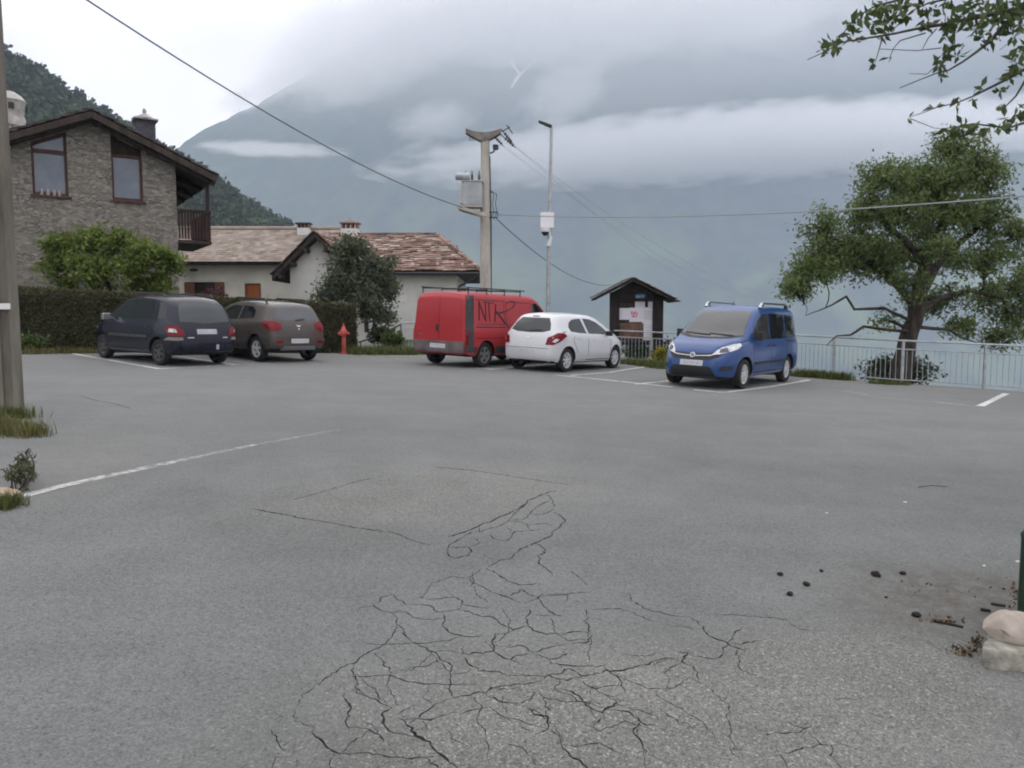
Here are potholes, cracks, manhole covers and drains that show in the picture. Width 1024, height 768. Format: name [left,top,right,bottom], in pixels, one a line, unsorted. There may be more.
crack [256,478,430,545]
crack [447,490,566,574]
crack [271,568,767,768]
crack [767,698,860,768]
